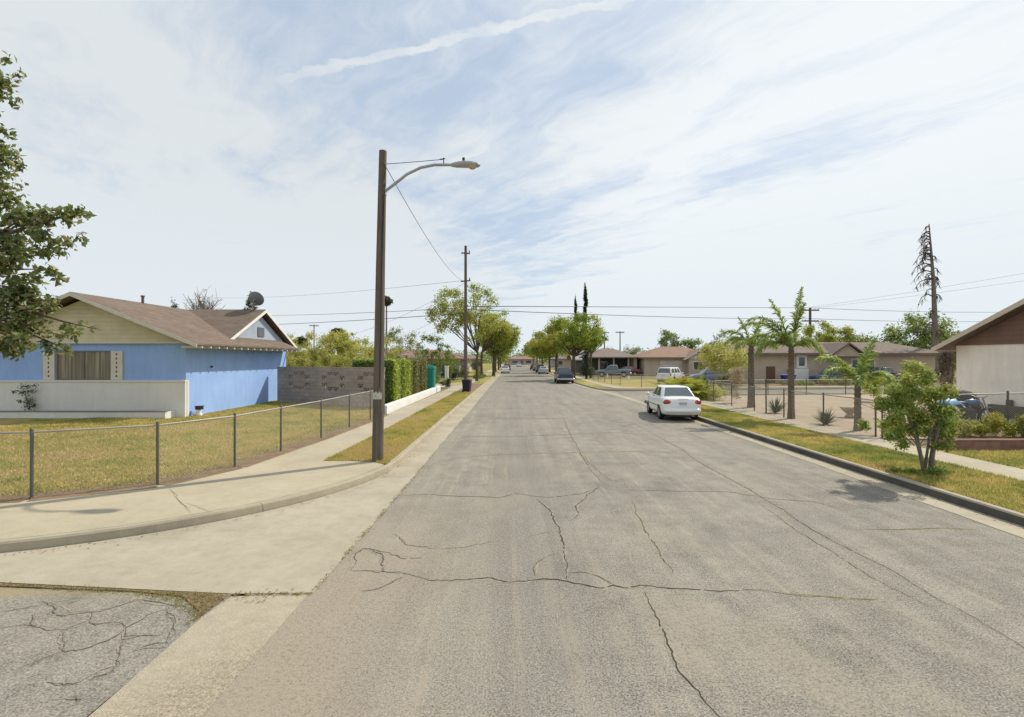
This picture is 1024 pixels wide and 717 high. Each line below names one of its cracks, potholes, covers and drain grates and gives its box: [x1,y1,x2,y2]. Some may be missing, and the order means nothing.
crack [348,408,1024,717]
crack [2,599,194,700]
